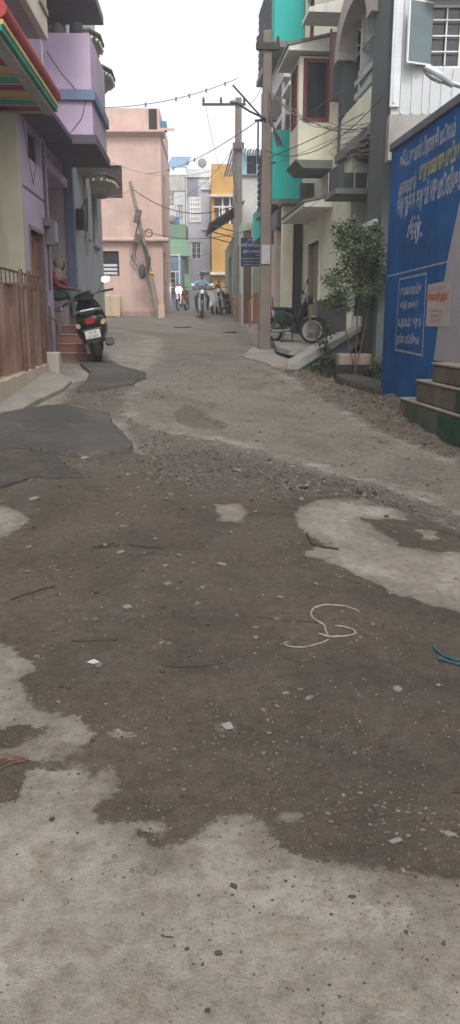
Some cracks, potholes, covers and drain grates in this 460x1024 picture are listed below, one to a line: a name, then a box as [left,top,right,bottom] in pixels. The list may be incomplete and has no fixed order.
pothole [170,402,237,435]
